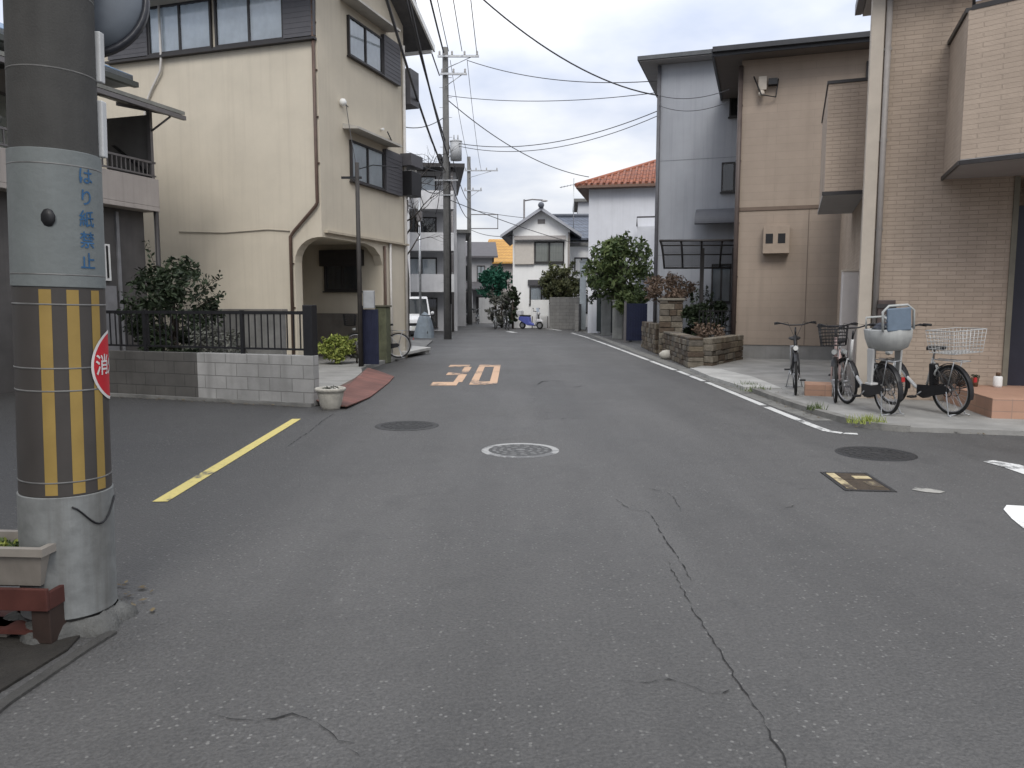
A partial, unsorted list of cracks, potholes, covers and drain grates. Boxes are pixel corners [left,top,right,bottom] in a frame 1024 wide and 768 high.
manhole cover [375,421,439,431]
manhole cover [481,443,559,458]
crack [619,488,787,768]
manhole cover [835,446,918,461]
crack [211,712,366,762]
utility cover [820,472,897,492]
